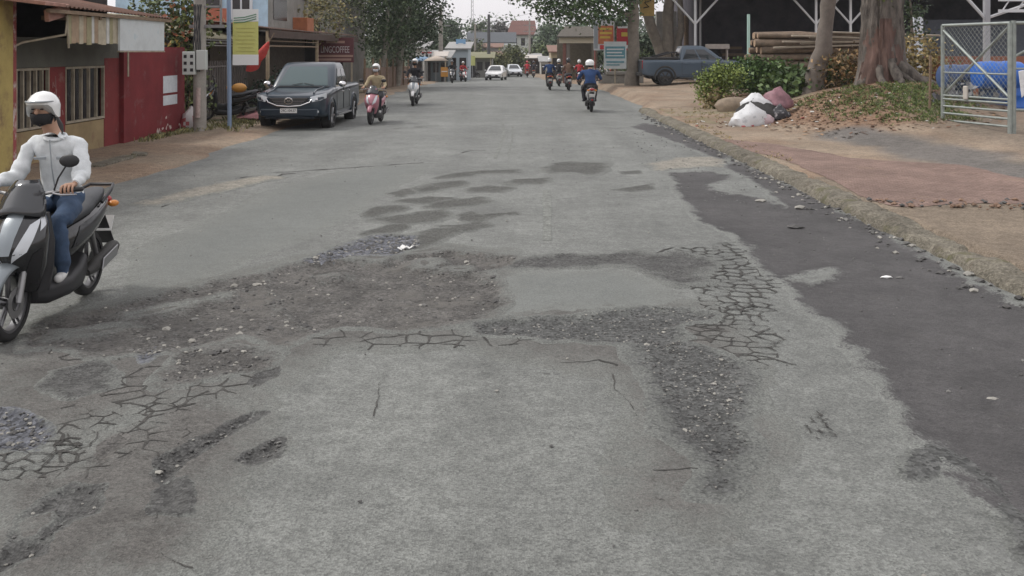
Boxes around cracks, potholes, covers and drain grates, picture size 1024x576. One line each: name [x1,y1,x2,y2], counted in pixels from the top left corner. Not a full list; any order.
crack [656,242,796,369]
pothole [616,340,771,505]
pothole [10,271,334,362]
pothole [148,410,271,485]
pothole [299,233,420,269]
